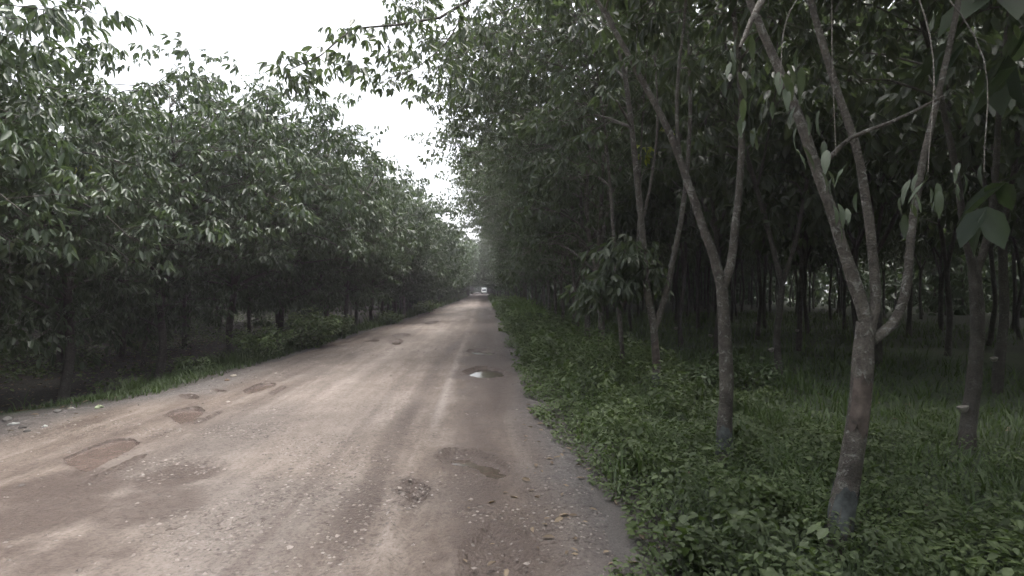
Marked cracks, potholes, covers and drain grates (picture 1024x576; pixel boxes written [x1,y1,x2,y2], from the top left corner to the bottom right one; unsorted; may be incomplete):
pothole [242,383,276,394]
pothole [62,438,140,473]
pothole [432,447,513,479]
pothole [395,479,431,505]
pothole [460,366,509,378]
pothole [163,406,206,424]
